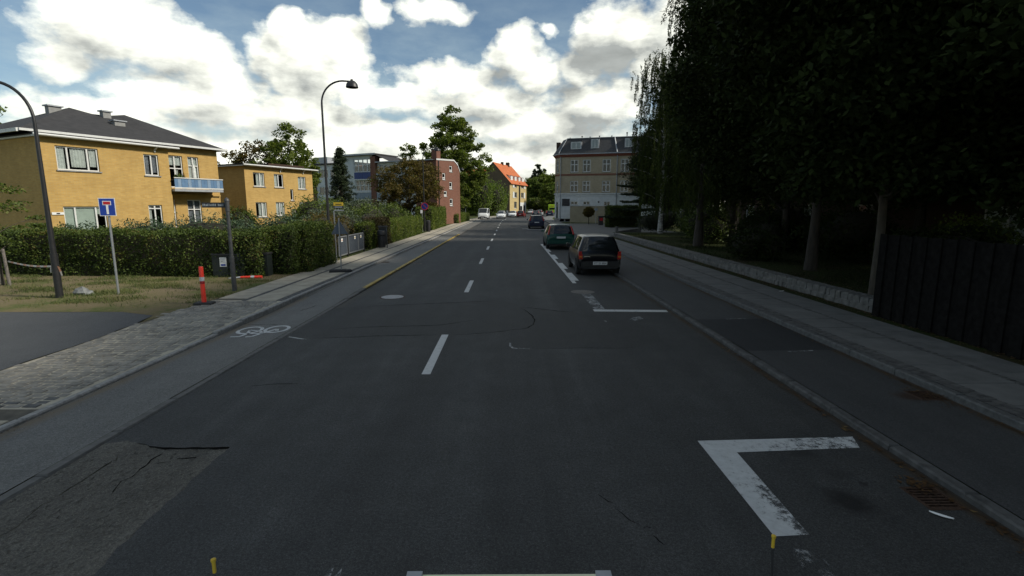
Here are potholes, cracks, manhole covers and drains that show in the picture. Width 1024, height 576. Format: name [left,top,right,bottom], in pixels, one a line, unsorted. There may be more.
drain grate [899,487,969,510]
crack [310,307,565,339]
